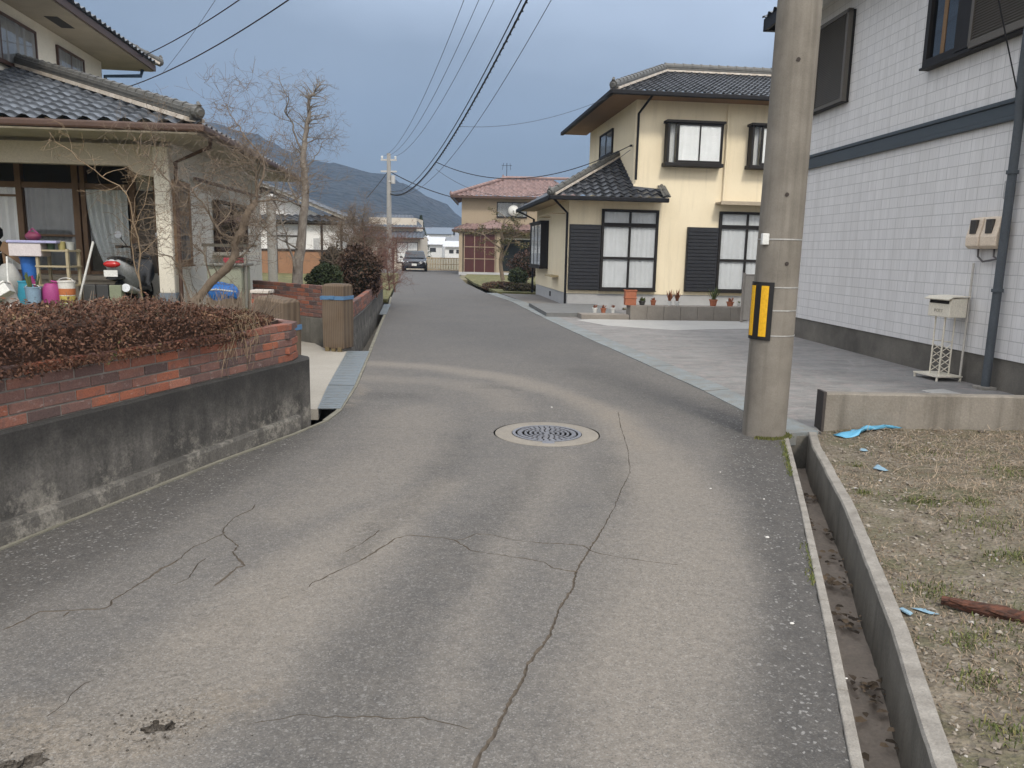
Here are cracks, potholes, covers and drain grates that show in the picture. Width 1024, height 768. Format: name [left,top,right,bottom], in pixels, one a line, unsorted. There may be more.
crack [3,505,255,630]
crack [248,415,676,768]
pothole [140,720,176,734]
pothole [0,752,50,768]
manhole cover [494,422,600,447]
